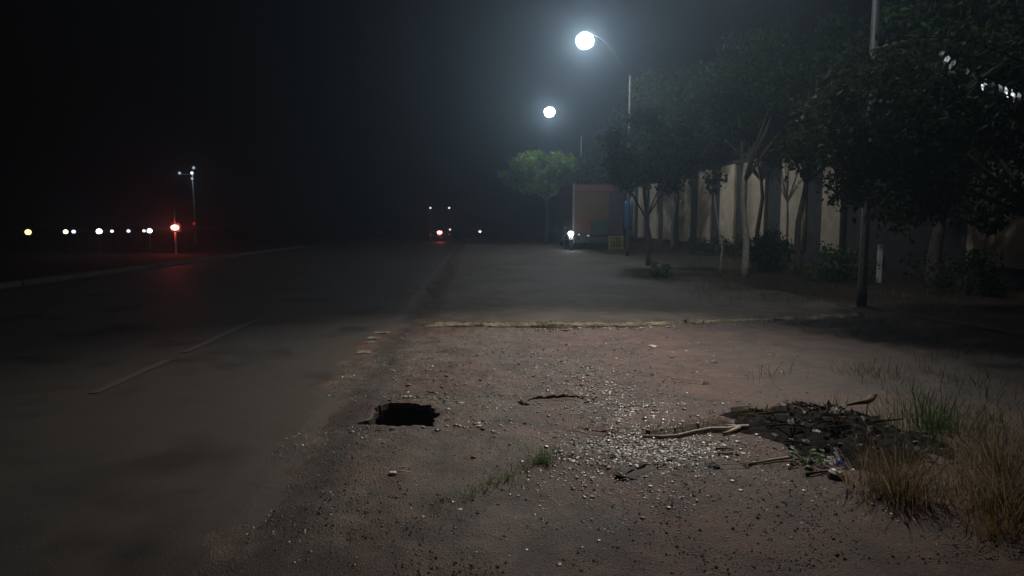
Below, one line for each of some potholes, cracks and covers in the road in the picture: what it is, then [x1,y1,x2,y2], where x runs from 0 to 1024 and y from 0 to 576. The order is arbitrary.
crack [519,371,704,406]
pothole [346,400,450,429]
